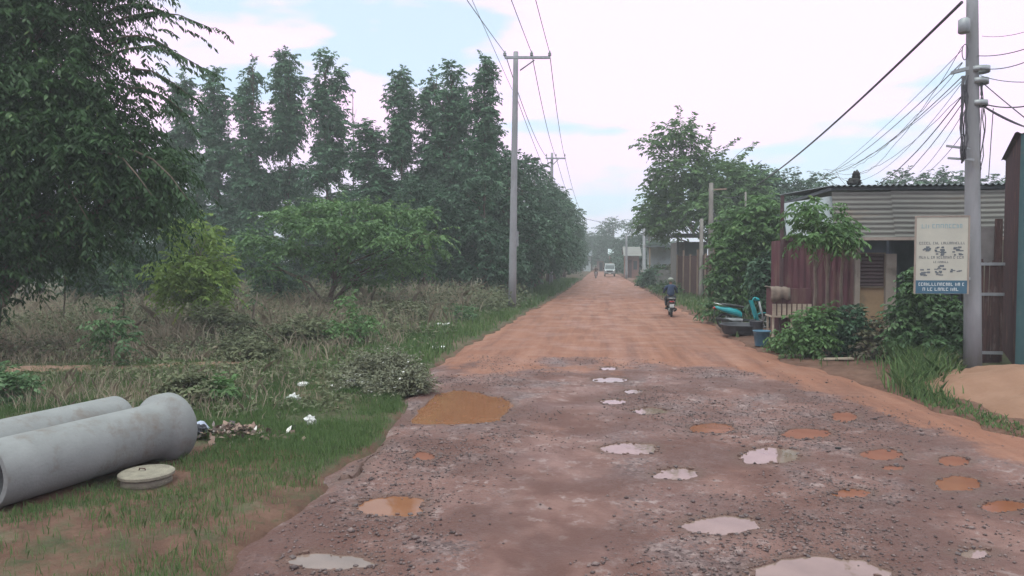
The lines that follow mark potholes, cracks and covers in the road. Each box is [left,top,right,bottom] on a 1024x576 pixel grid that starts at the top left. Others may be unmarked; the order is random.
pothole [977,498,1024,513]
pothole [353,493,426,517]
pothole [859,447,904,461]
pothole [599,441,660,455]
pothole [931,474,983,491]
pothole [408,388,514,426]
pothole [651,465,699,481]
pothole [678,513,762,536]
pothole [744,553,895,576]
pothole [688,421,735,433]
pothole [831,487,871,497]
pothole [285,549,378,572]
